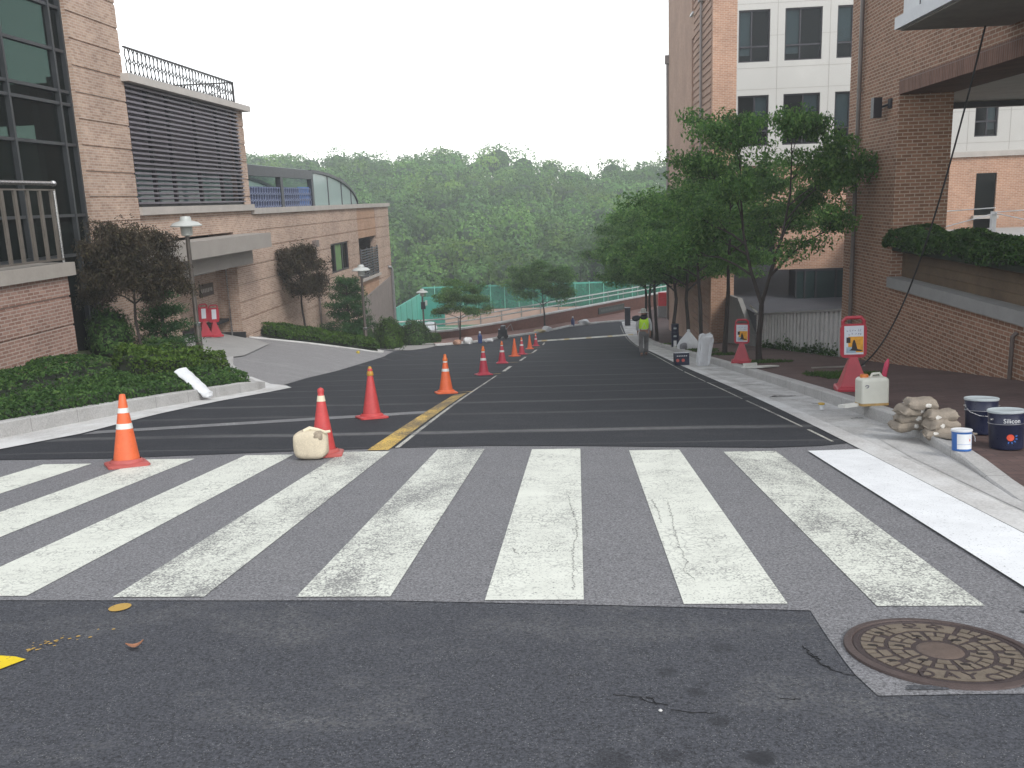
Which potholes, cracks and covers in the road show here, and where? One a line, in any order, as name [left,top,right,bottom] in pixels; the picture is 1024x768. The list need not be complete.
manhole cover [843,618,1024,691]
crack [613,694,717,714]
crack [652,499,695,580]
crack [802,645,853,676]
crack [568,496,579,590]
